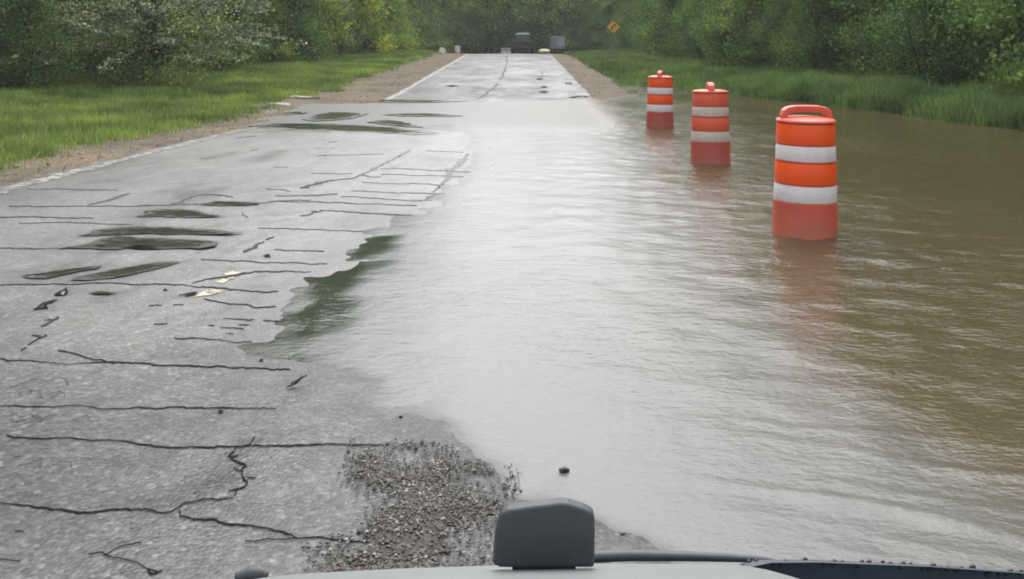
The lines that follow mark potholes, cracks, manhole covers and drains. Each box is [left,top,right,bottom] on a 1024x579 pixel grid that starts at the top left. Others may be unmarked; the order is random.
pothole [138,209,225,218]
crack [1,141,469,343]
crack [0,316,390,546]
pothole [78,226,243,236]
pothole [57,236,219,250]
pothole [20,264,103,278]
pothole [302,111,368,121]
crack [89,542,162,575]
pothole [70,261,181,280]
